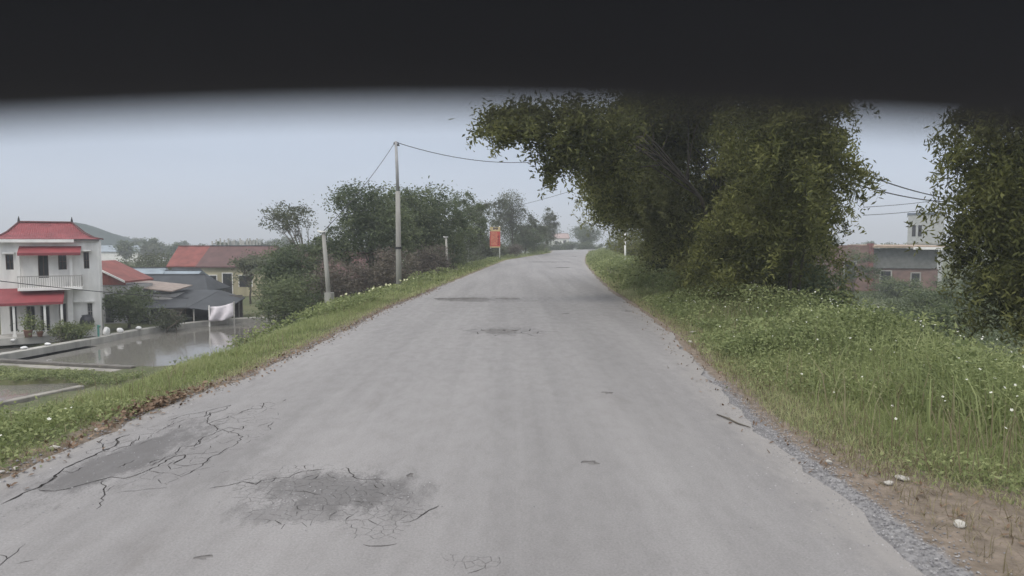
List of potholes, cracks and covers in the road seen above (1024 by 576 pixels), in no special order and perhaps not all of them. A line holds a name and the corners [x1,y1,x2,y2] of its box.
crack [2,400,285,509]
